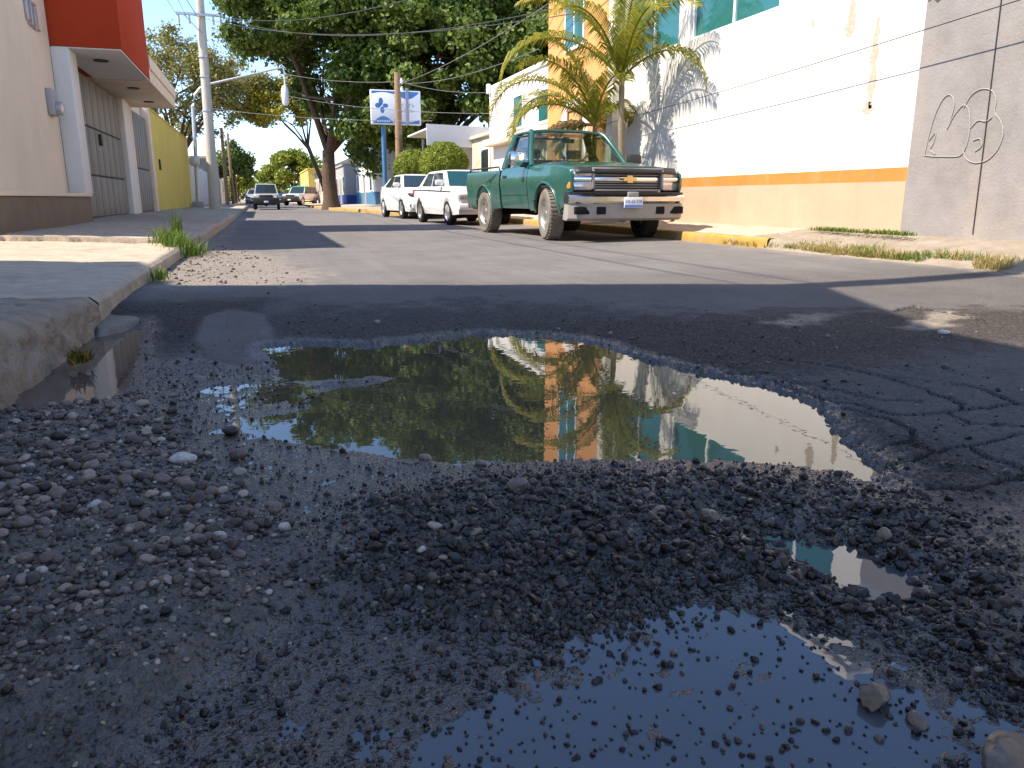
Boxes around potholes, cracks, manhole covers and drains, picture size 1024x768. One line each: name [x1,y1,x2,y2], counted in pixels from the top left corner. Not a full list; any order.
crack [774,372,1024,492]
pothole [750,515,972,612]
pothole [196,329,894,487]
pothole [384,592,1024,768]
